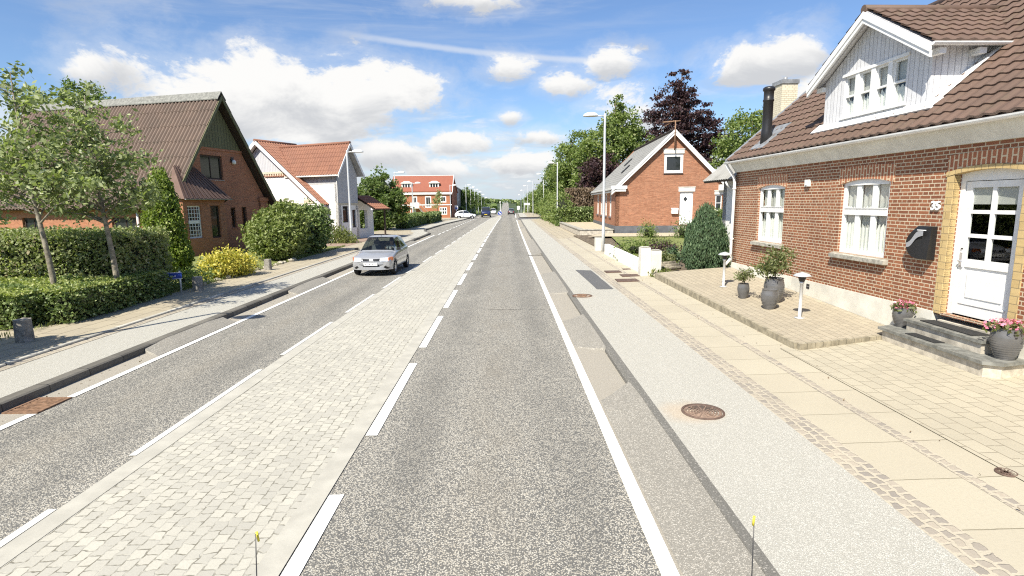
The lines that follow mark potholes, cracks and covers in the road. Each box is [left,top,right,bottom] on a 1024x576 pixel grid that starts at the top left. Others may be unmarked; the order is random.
manhole cover [994,467,1018,477]
manhole cover [681,403,725,420]
drain grate [1,397,72,414]
